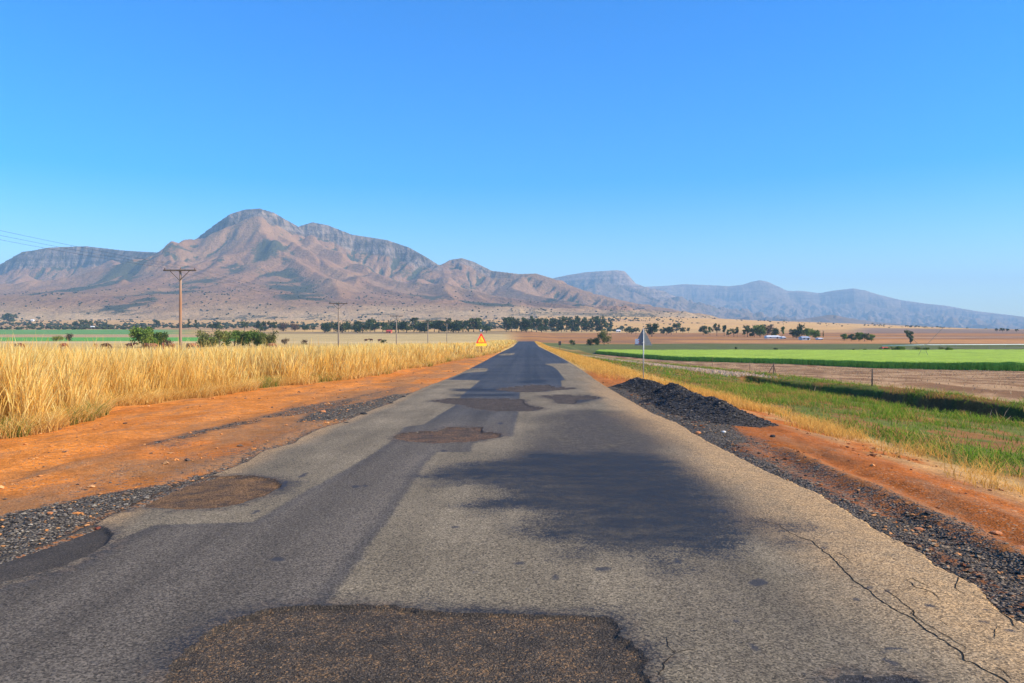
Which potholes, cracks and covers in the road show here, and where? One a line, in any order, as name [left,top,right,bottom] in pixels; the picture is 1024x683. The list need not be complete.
crack [761,520,1017,683]
